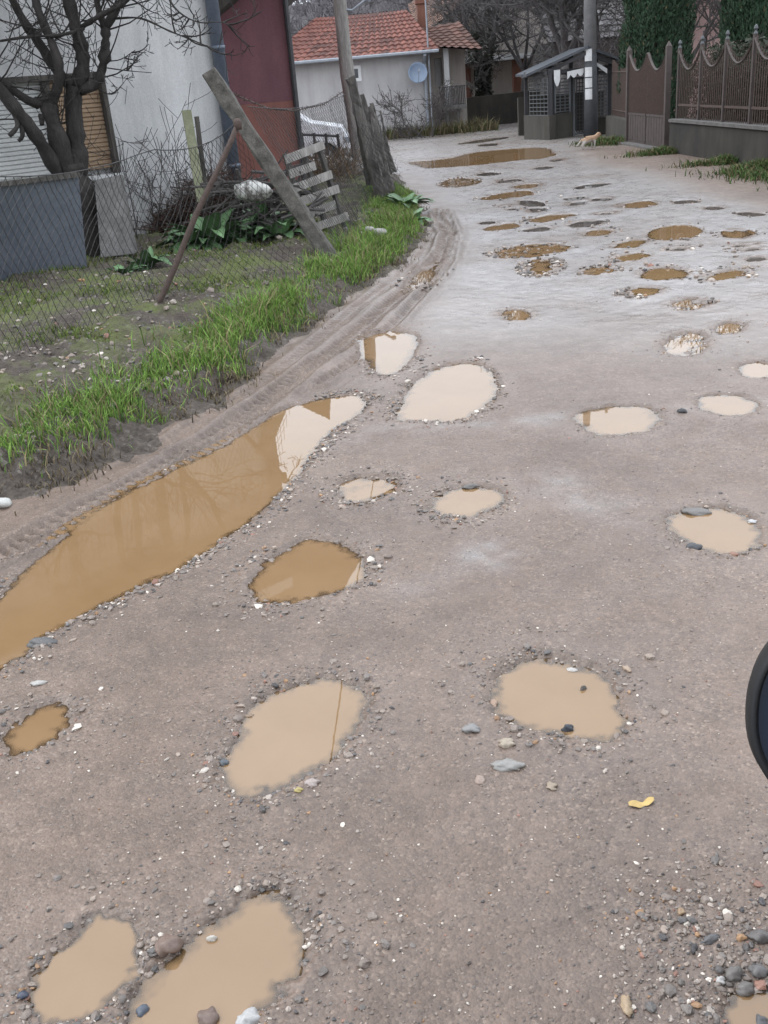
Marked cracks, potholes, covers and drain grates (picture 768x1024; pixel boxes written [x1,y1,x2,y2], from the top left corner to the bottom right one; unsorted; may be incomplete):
pothole [106,877,324,1024]
pothole [329,472,403,504]
pothole [492,243,574,258]
pothole [0,695,82,761]
pothole [389,359,504,423]
pothole [0,391,373,672]
pothole [569,403,668,438]
pothole [644,225,703,241]
pothole [409,147,556,168]
pothole [654,502,768,557]
pothole [658,329,714,356]
pothole [637,265,693,281]
